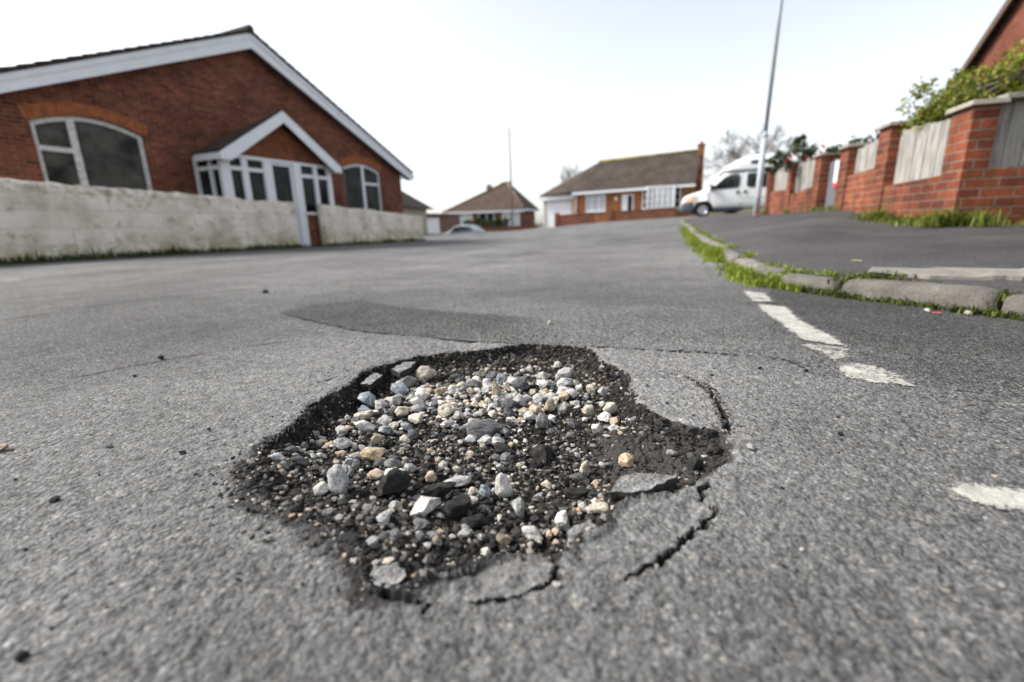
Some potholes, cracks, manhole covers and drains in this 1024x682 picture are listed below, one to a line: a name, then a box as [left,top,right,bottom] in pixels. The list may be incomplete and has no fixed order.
crack [625,481,719,582]
crack [589,346,742,356]
pothole [243,344,734,591]
crack [658,371,743,439]
crack [66,340,291,380]
